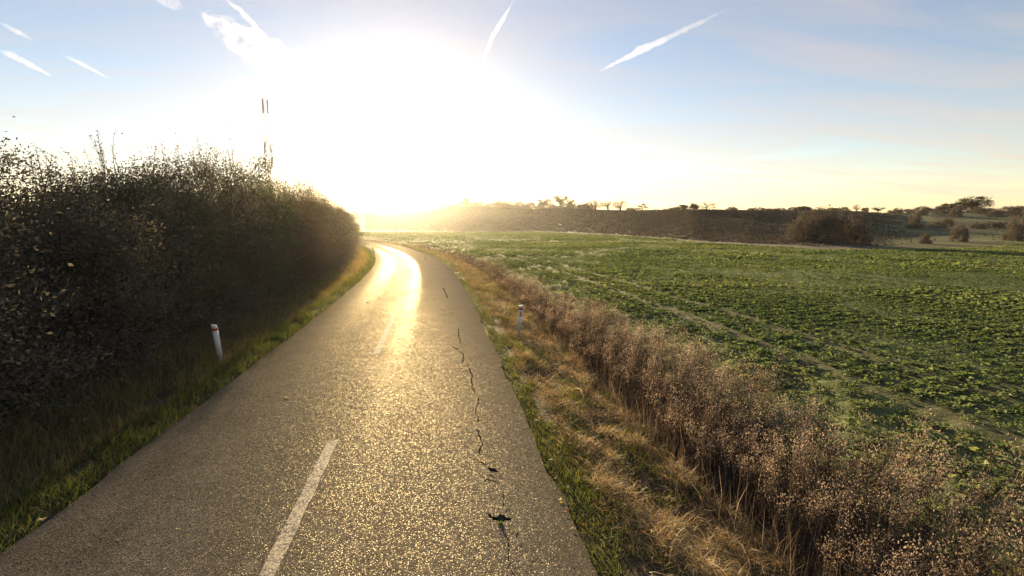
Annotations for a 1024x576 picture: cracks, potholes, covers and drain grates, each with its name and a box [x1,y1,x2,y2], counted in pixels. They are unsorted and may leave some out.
crack [503,532,522,576]
crack [452,329,510,513]
